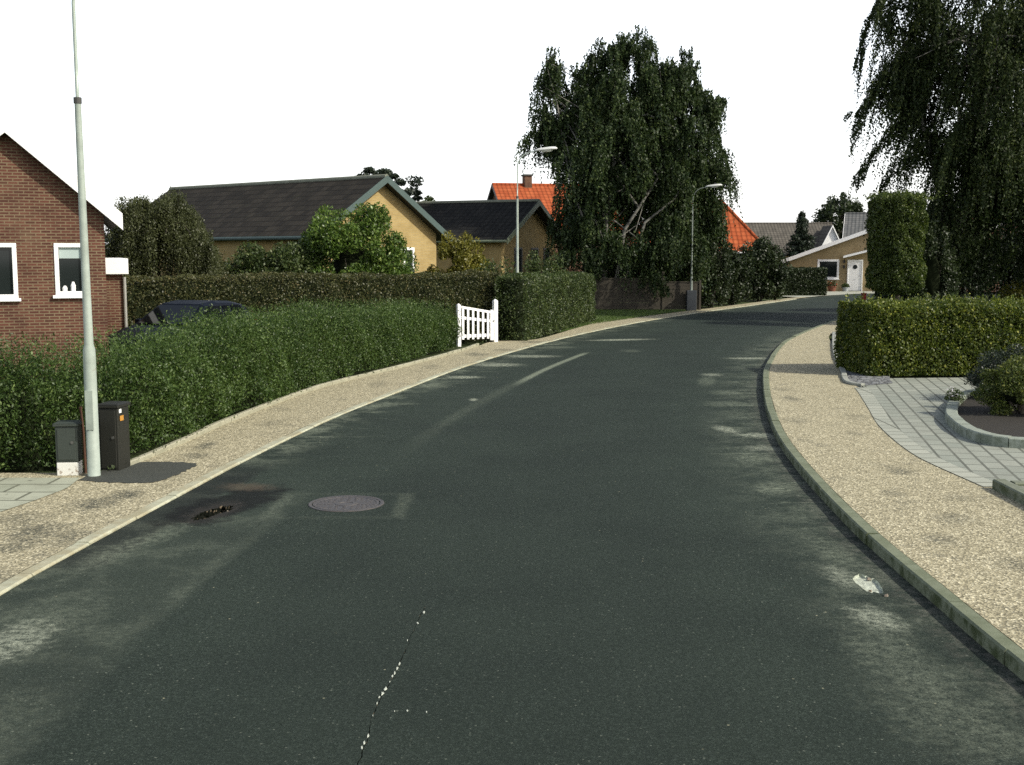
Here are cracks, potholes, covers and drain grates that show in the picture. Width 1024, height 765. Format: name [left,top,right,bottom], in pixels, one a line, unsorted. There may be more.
pothole [191,506,234,521]
crack [357,609,427,765]
manhole cover [308,495,384,512]
